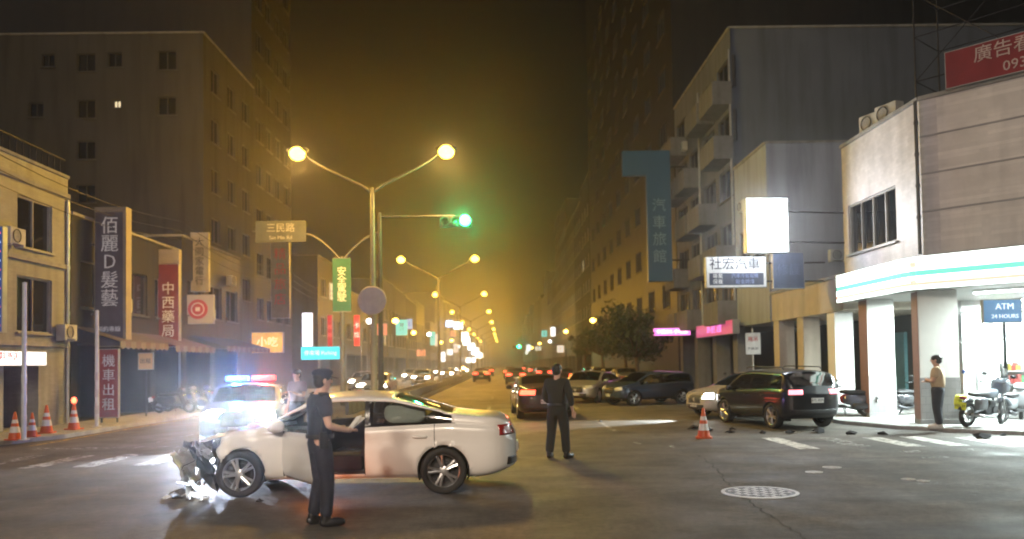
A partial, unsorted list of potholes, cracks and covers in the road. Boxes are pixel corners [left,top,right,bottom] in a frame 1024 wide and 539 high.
crack [696,454,805,539]
manhole cover [721,486,800,499]
